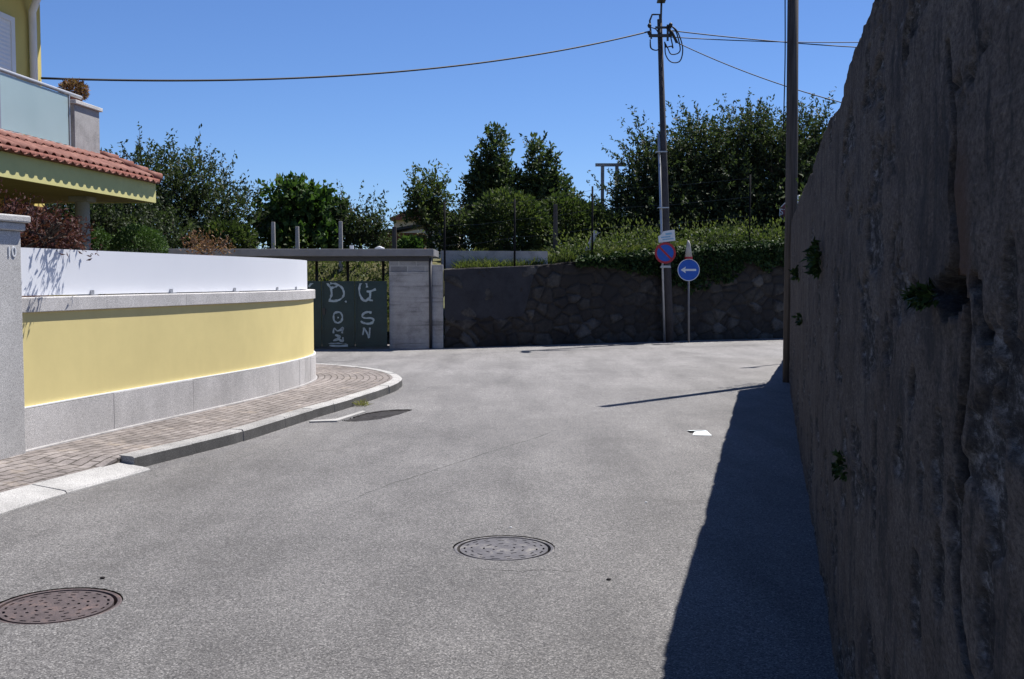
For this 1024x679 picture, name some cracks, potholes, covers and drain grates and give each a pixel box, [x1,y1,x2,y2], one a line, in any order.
manhole cover [454,536,554,561]
crack [347,430,555,502]
manhole cover [0,588,122,625]
